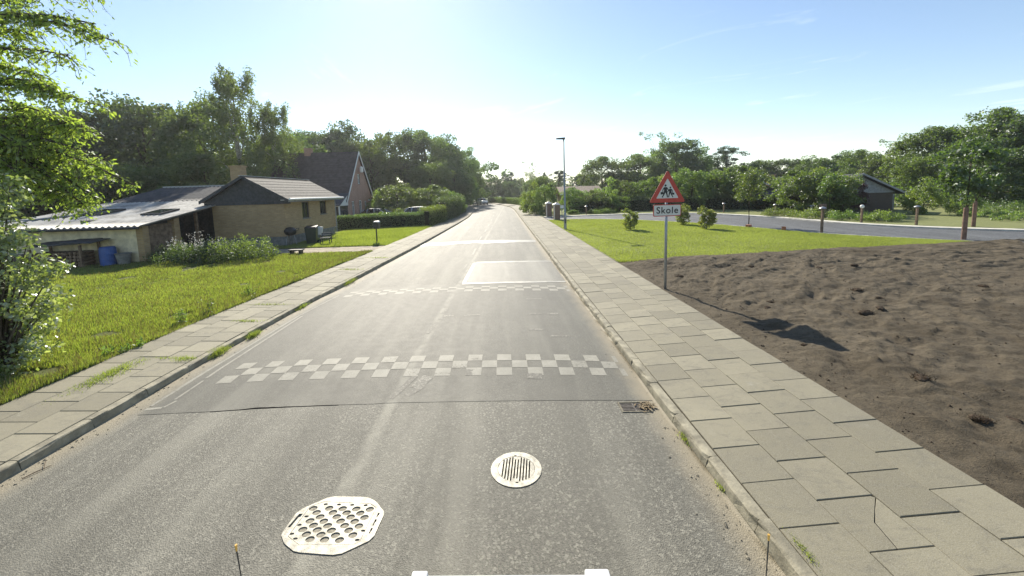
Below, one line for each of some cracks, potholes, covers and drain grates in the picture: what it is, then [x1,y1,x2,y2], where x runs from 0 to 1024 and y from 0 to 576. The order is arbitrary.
manhole cover [281,496,384,556]
drain grate [617,401,653,413]
